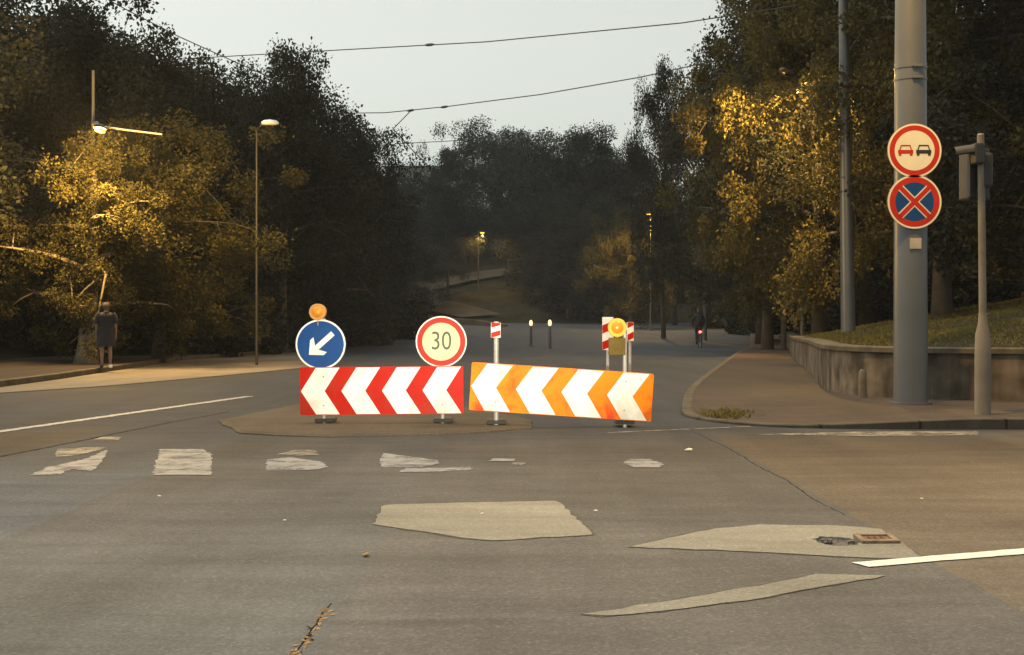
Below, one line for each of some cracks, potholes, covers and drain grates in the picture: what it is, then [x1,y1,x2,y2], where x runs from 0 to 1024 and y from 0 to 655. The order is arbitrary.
pothole [813,536,859,546]
crack [295,603,331,655]
